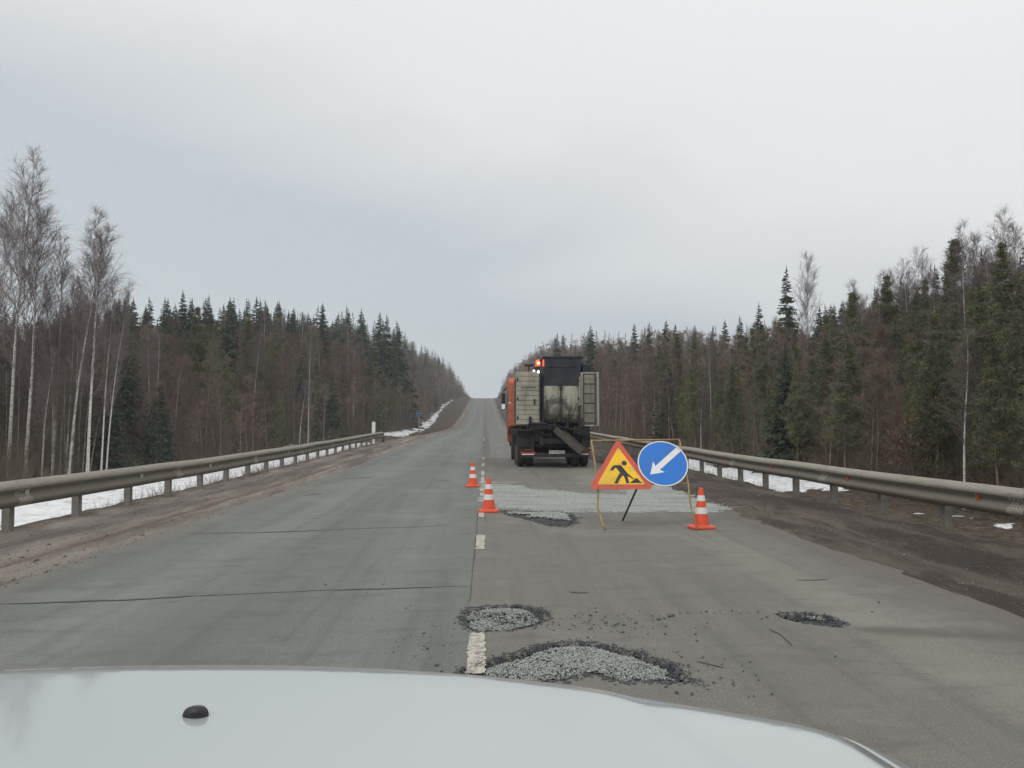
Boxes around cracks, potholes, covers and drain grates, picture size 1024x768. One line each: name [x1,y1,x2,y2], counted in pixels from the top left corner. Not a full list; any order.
pothole [440,638,709,687]
pothole [773,611,850,628]
pothole [453,604,552,632]
pothole [499,510,584,527]
